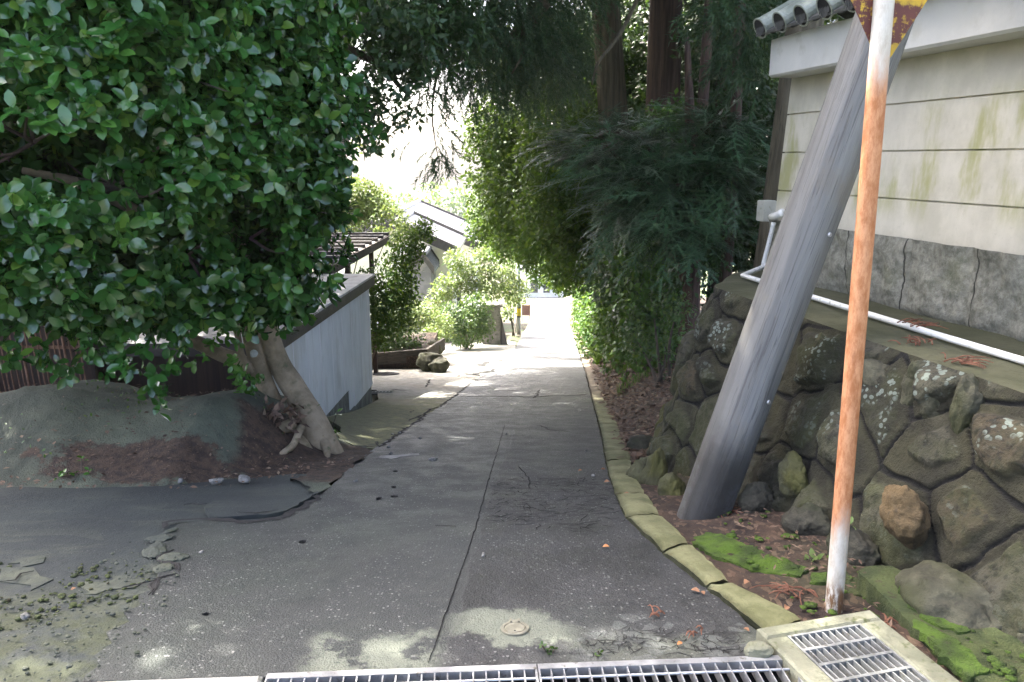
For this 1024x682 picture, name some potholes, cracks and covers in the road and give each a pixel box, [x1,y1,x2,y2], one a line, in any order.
crack [580,627,745,658]
crack [489,467,625,534]
drain grate [537,655,803,682]
drain grate [264,664,539,682]
utility cover [501,618,529,637]
